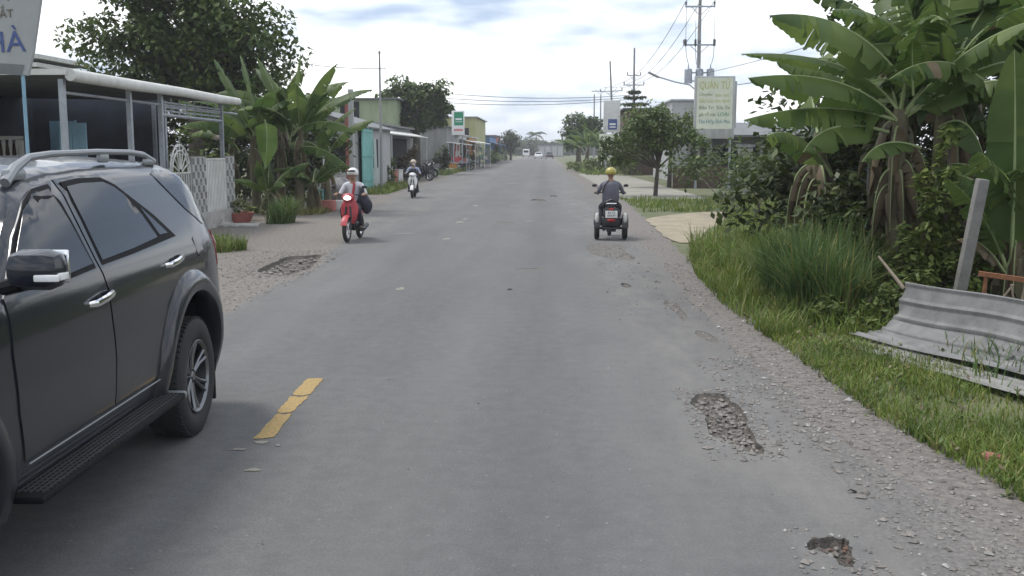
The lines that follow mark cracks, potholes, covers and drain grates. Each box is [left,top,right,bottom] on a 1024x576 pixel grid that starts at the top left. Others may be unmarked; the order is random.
pothole [689,393,765,455]
pothole [804,536,856,567]
pothole [257,255,321,276]
